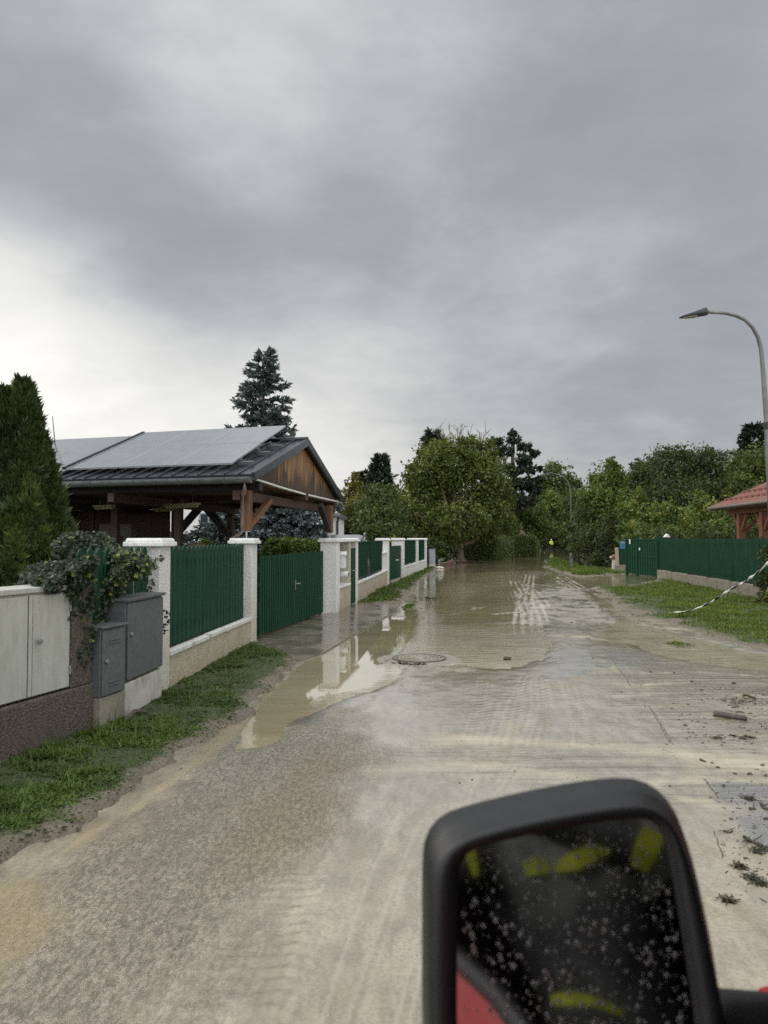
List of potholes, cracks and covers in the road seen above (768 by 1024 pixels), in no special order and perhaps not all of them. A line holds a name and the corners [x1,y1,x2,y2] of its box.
manhole cover [376,653,463,666]
